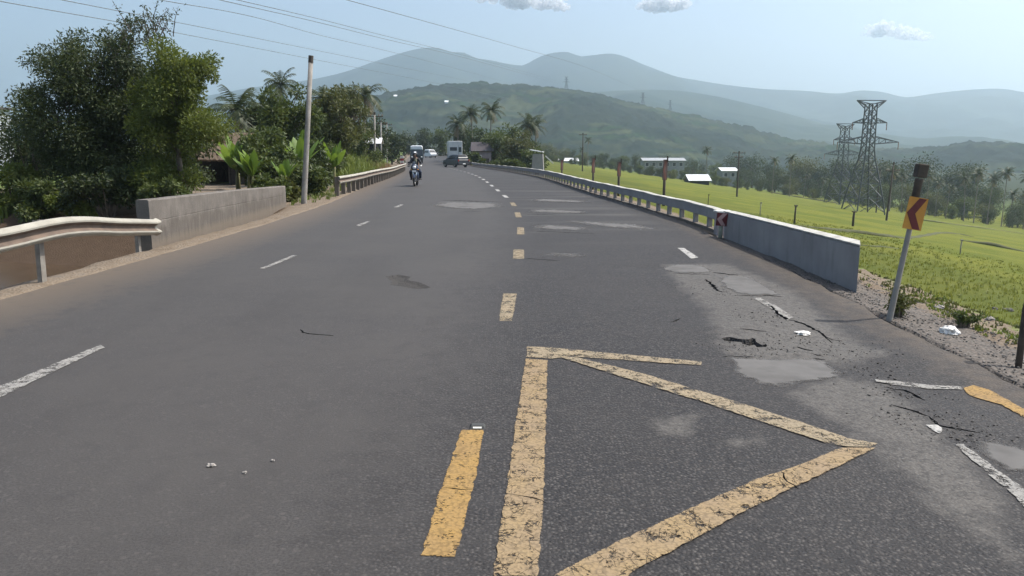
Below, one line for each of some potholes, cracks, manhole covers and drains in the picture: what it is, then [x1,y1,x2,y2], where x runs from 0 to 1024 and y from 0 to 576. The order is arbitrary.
crack [681,272,734,292]
crack [741,295,840,360]
pothole [386,275,431,289]
pothole [721,337,767,347]
crack [877,382,980,433]
